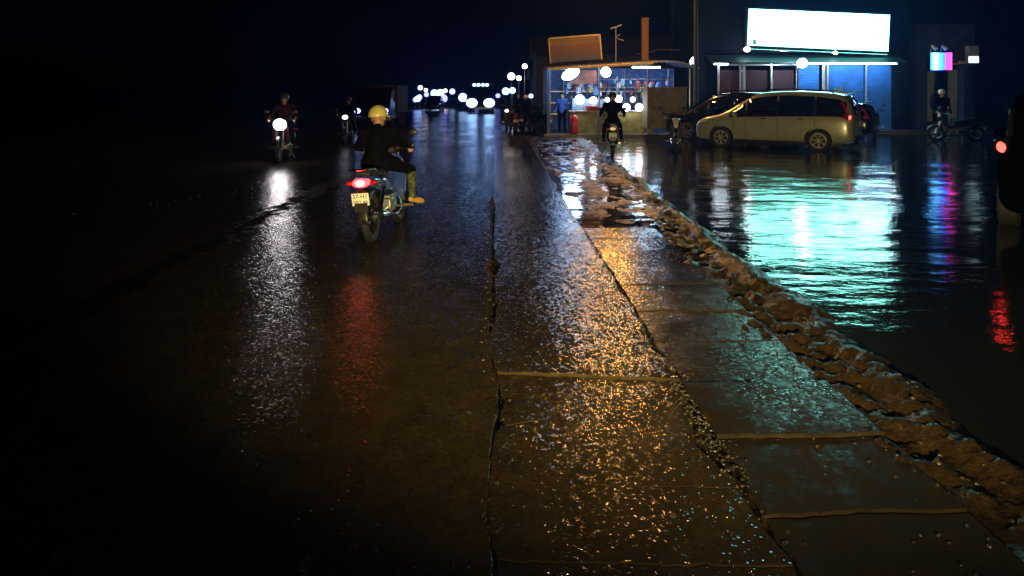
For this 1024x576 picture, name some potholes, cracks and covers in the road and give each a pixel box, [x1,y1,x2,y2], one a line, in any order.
crack [486,171,502,576]
